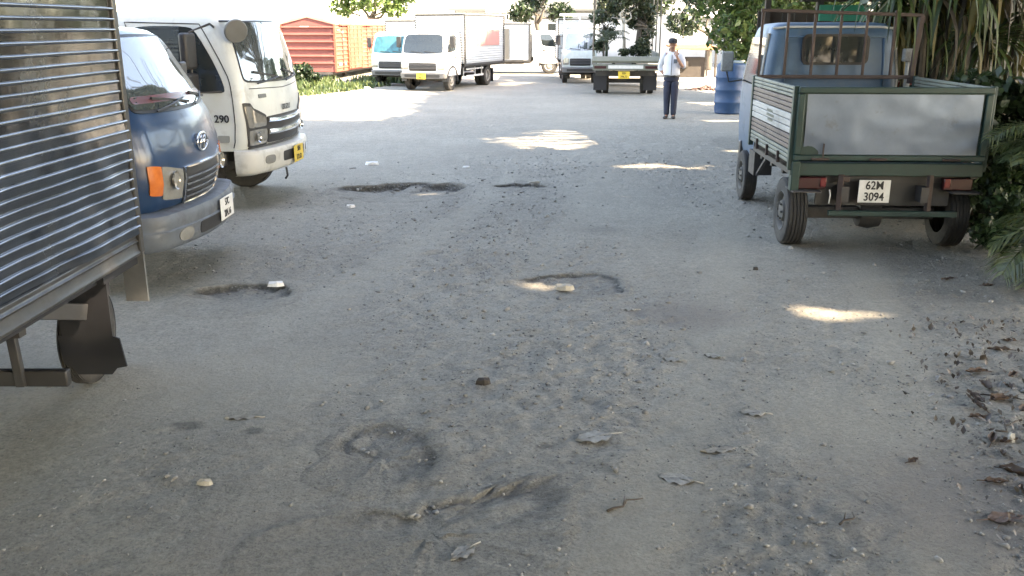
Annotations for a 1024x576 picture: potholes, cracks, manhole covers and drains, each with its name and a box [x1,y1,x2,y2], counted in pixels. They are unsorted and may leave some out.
pothole [160,281,305,320]
pothole [503,270,636,302]
pothole [318,181,474,203]
pothole [299,416,456,501]
pothole [486,182,557,194]
